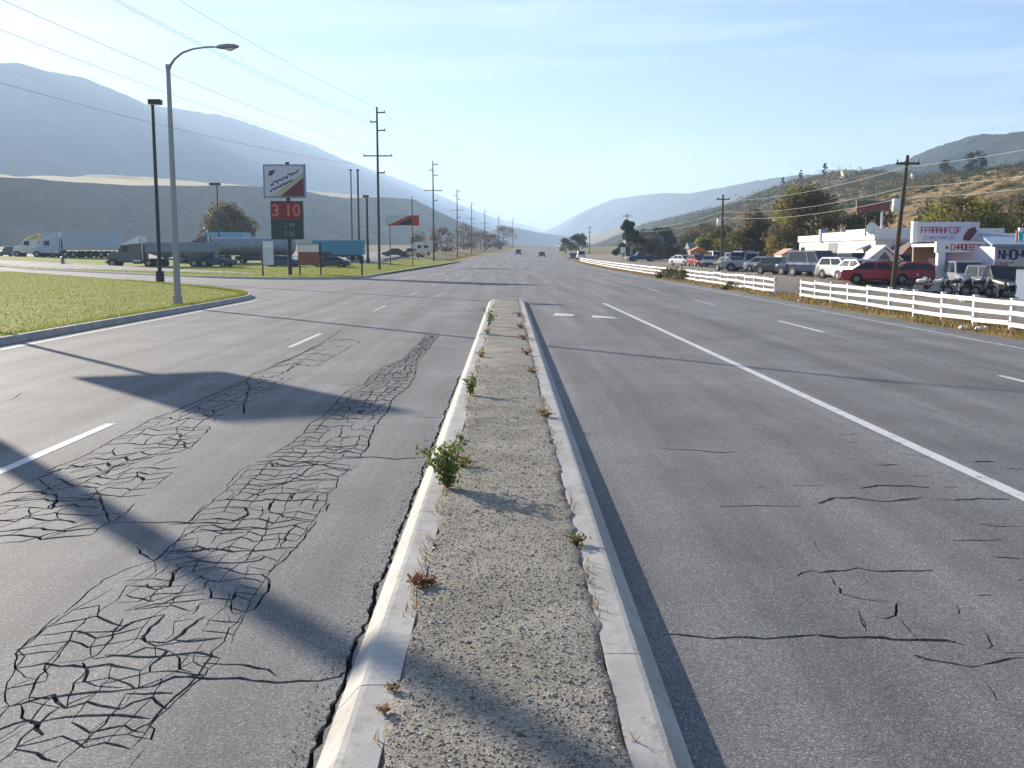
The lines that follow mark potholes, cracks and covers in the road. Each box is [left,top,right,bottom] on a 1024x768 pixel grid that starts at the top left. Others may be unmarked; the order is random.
crack [663,540,1024,701]
crack [795,426,1014,504]
crack [952,518,1023,559]
crack [0,330,439,768]
